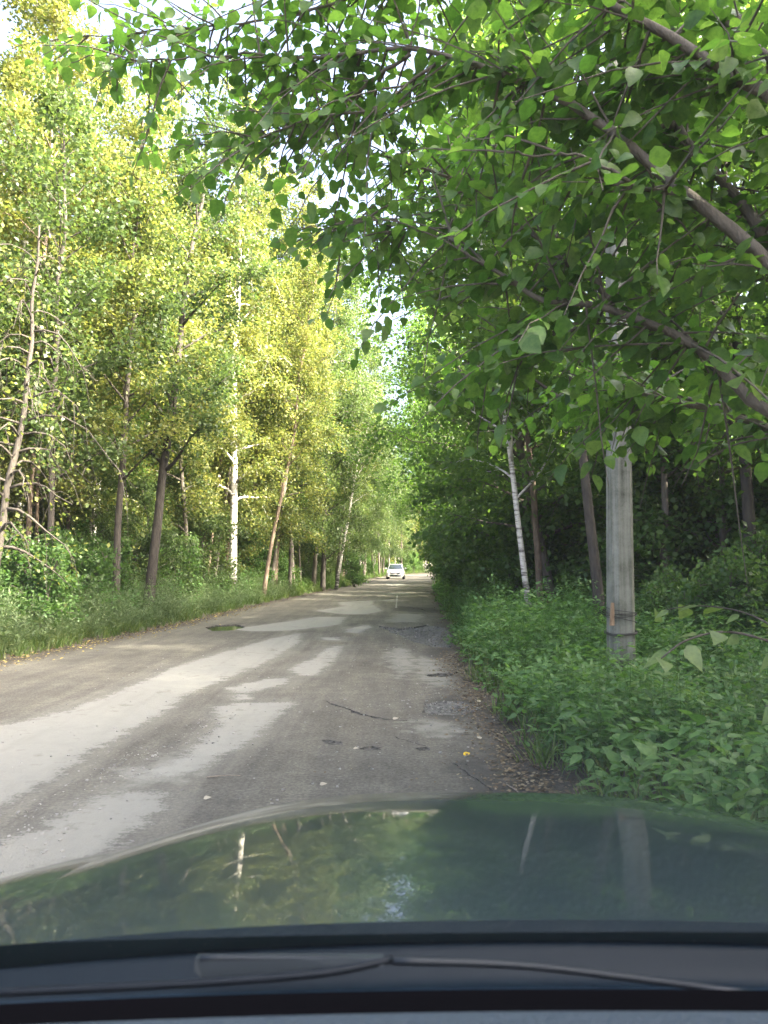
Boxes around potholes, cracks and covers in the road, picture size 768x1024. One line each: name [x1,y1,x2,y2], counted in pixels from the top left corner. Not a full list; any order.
crack [450,762,495,792]
crack [326,701,426,746]
